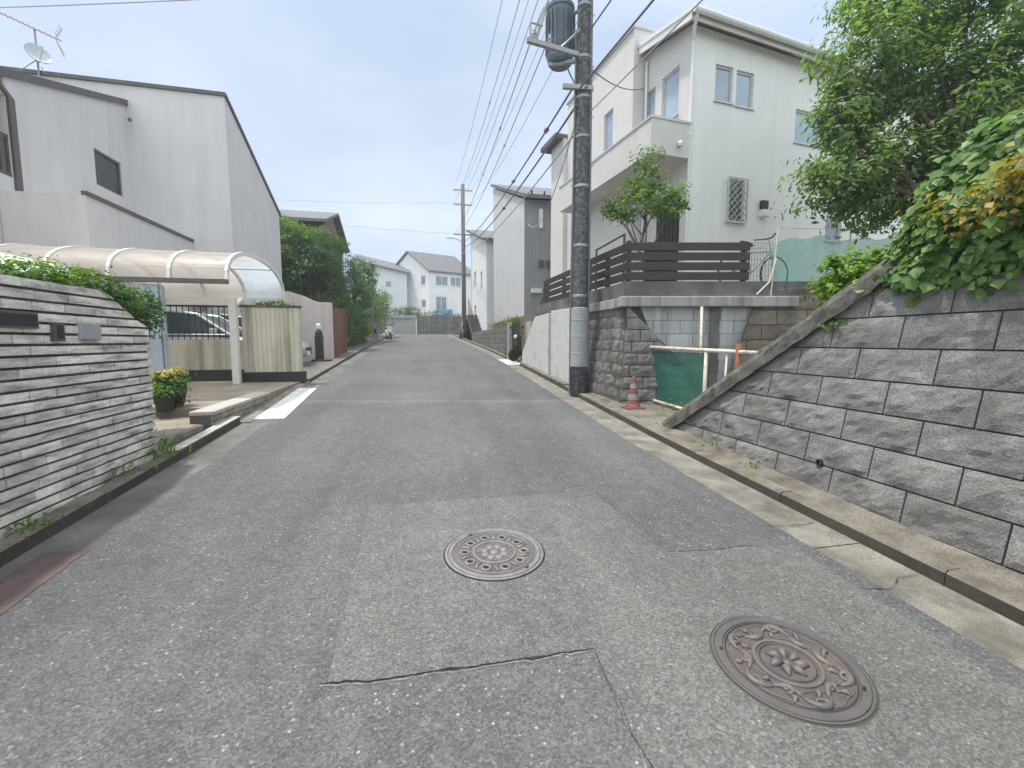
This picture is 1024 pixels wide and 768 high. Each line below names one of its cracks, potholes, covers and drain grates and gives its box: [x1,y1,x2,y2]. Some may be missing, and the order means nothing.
manhole cover [443,528,545,582]
crack [319,648,653,768]
manhole cover [709,615,880,728]
